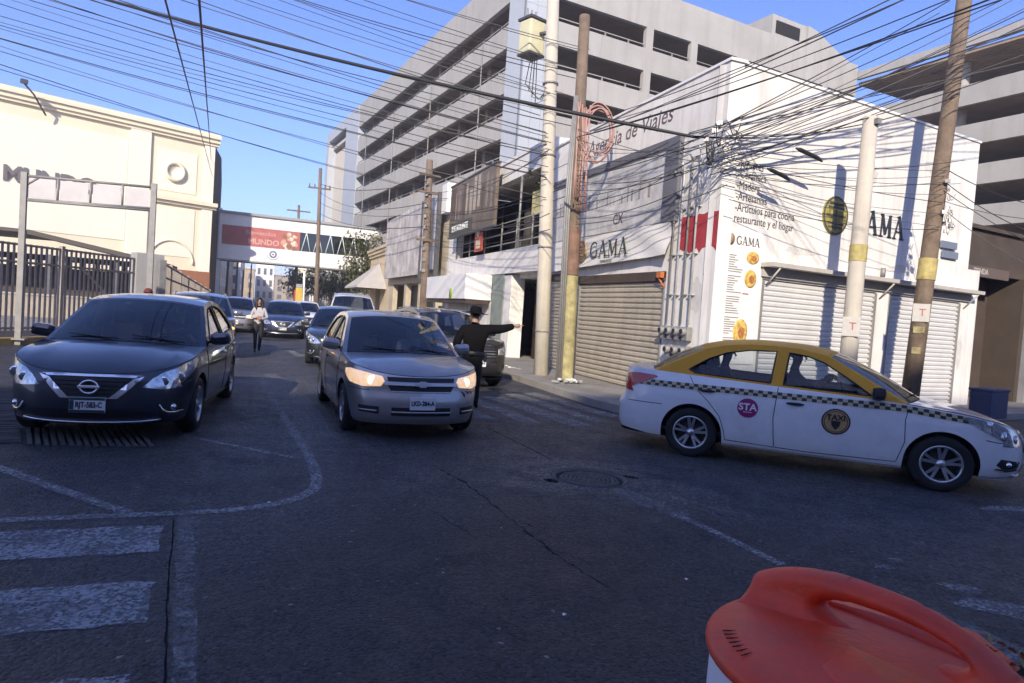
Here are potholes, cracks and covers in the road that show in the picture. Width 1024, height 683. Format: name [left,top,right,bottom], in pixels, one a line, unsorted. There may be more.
manhole cover [550,468,629,487]
drain grate [26,422,154,447]
crack [438,468,612,589]
